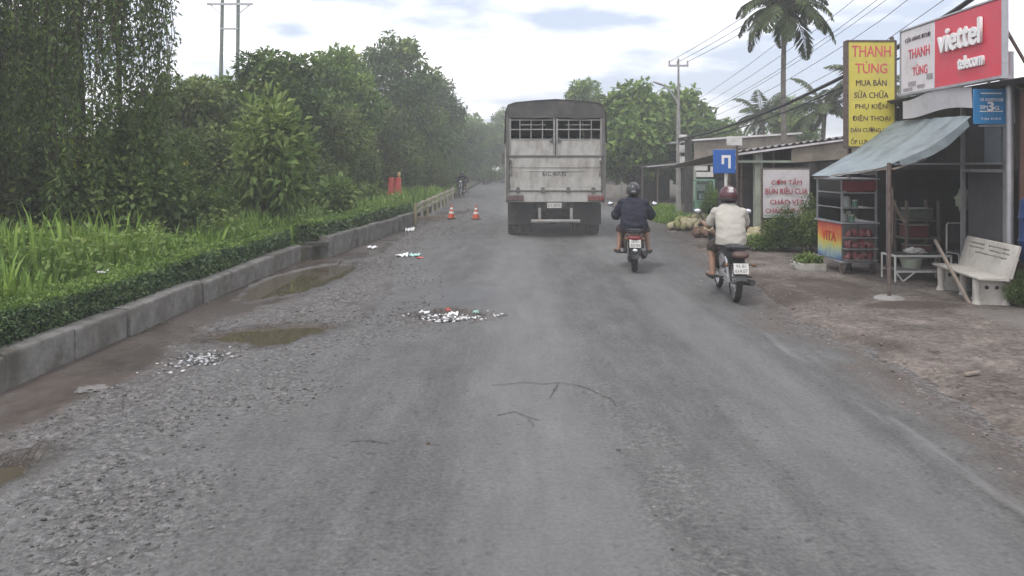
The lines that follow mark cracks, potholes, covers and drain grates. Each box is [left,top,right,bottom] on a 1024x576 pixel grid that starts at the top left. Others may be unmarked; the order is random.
crack [491,382,617,424]
pothole [230,261,364,304]
pothole [392,306,494,326]
pothole [189,321,358,349]
